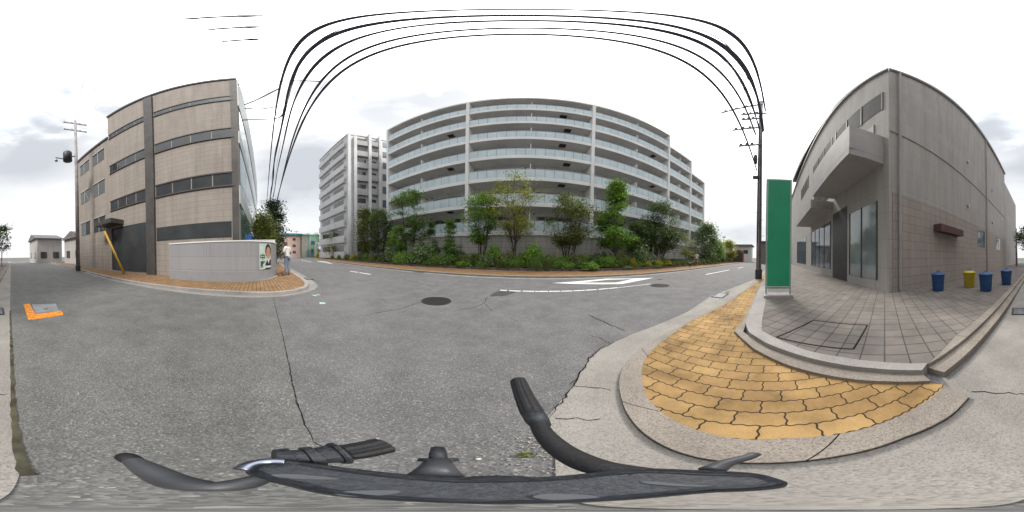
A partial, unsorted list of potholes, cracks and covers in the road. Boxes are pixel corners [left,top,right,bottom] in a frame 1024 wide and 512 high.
crack [551,314,624,421]
manhole cover [421,297,451,305]
manhole cover [23,304,64,320]
